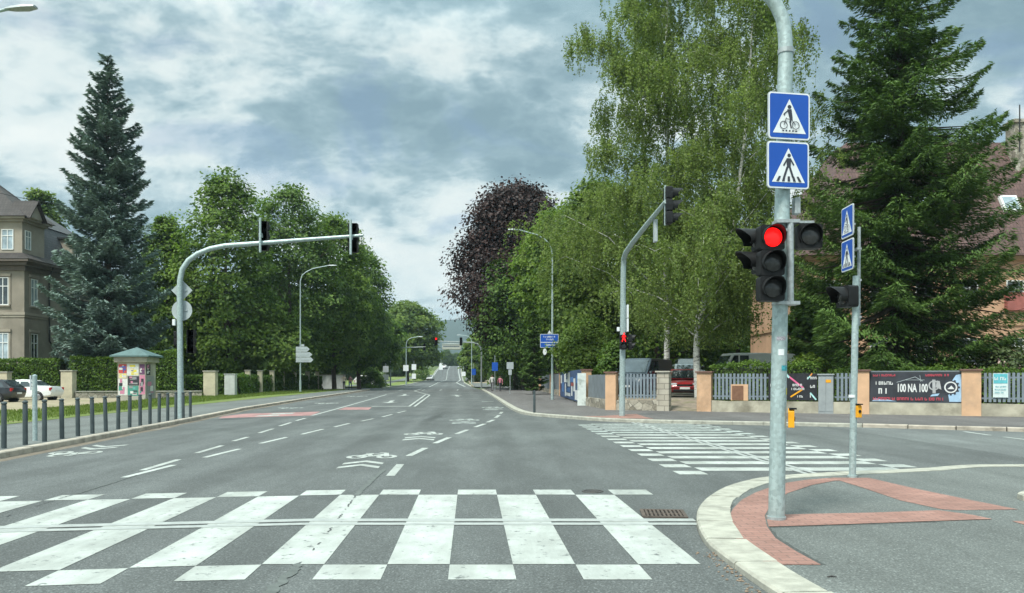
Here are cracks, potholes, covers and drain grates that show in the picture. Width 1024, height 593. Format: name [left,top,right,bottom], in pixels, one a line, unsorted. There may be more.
drain grate [640,509,688,518]
crack [262,469,386,593]
